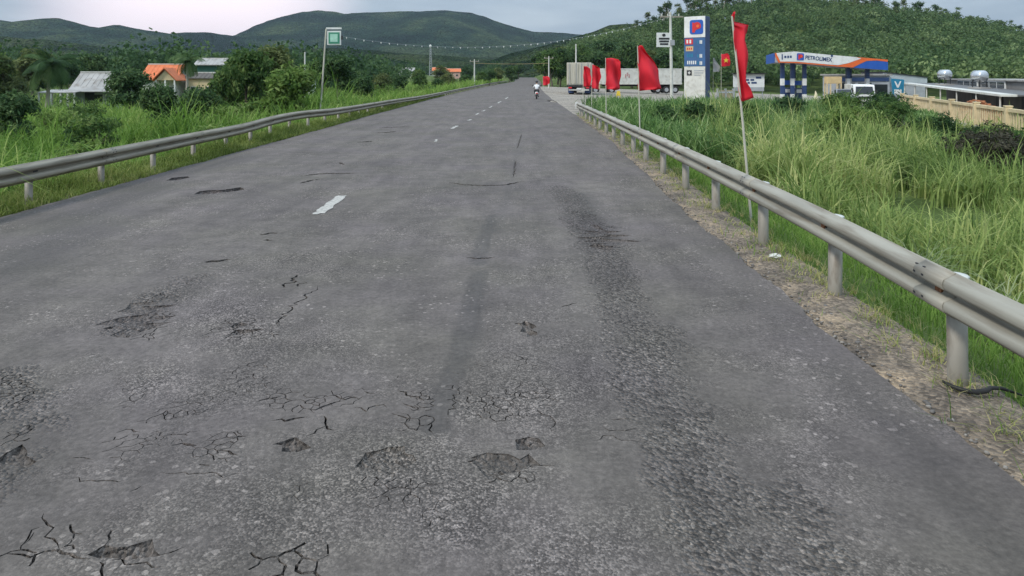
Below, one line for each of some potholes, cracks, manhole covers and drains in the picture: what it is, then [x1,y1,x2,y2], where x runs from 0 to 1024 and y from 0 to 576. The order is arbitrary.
pothole [515,437,545,450]
pothole [88,539,161,561]
pothole [355,446,416,477]
pothole [515,321,537,336]
pothole [468,452,540,480]
pothole [221,322,262,341]
crack [248,542,329,576]
pothole [0,444,37,468]
pothole [273,438,312,452]
crack [450,134,522,186]
pothole [96,302,174,338]
crack [202,274,318,344]
